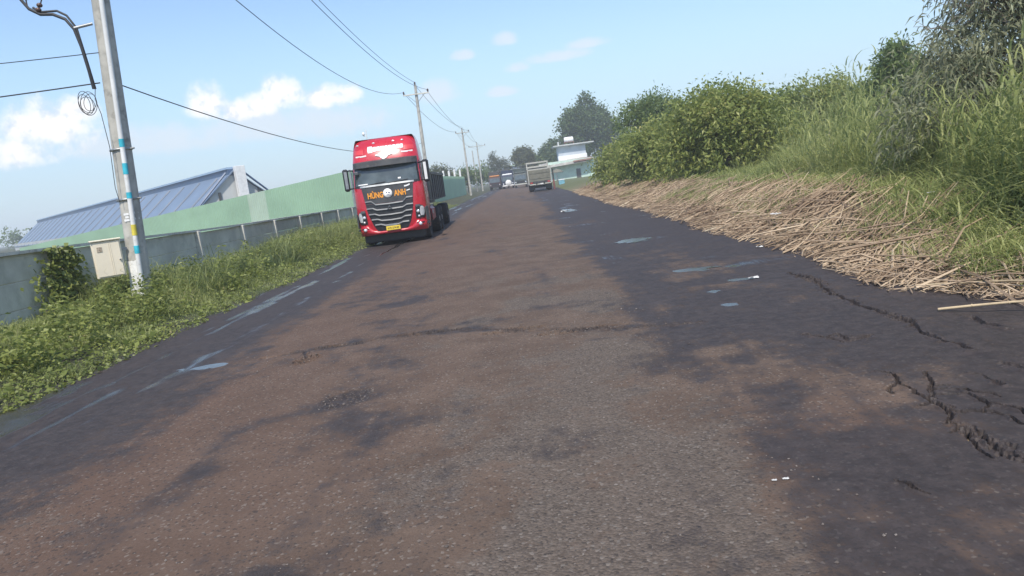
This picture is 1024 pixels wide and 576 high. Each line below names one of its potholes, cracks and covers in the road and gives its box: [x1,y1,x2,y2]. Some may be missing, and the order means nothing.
crack [261,321,702,365]
pothole [320,388,375,410]
crack [893,479,931,495]
crack [787,272,1003,349]
crack [874,361,1024,465]
